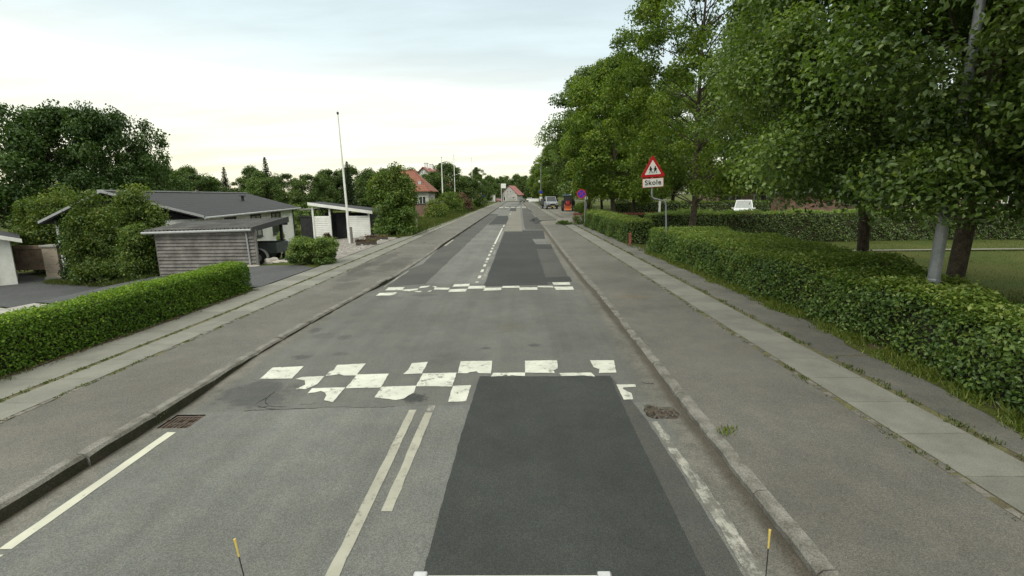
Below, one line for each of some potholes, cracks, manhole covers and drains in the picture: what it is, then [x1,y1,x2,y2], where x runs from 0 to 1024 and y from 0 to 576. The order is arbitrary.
crack [248,392,396,411]
drain grate [160,414,205,428]
drain grate [653,410,679,419]
